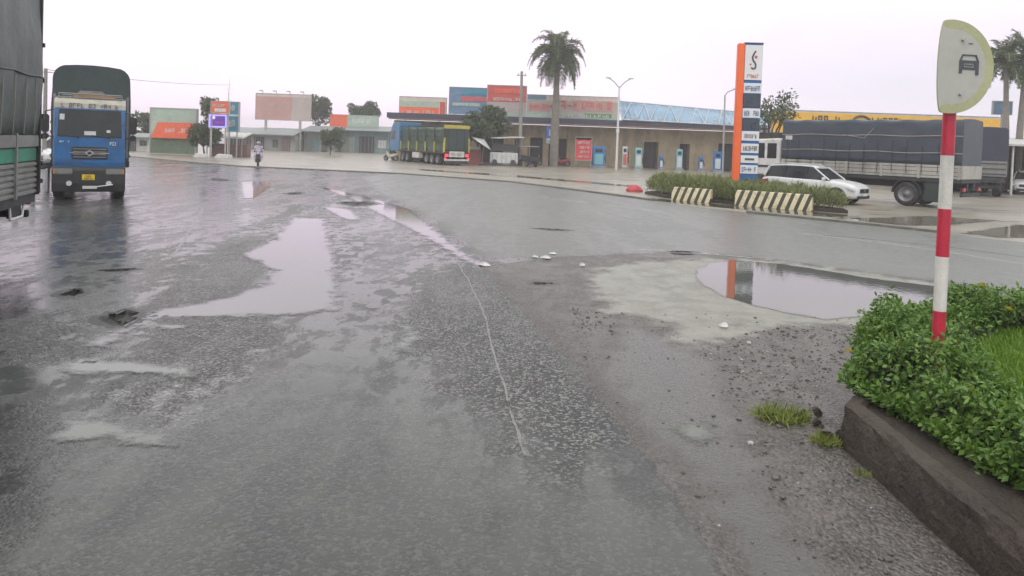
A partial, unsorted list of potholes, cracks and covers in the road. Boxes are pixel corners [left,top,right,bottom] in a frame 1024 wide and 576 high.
pothole [50,287,93,298]
pothole [87,308,147,329]
